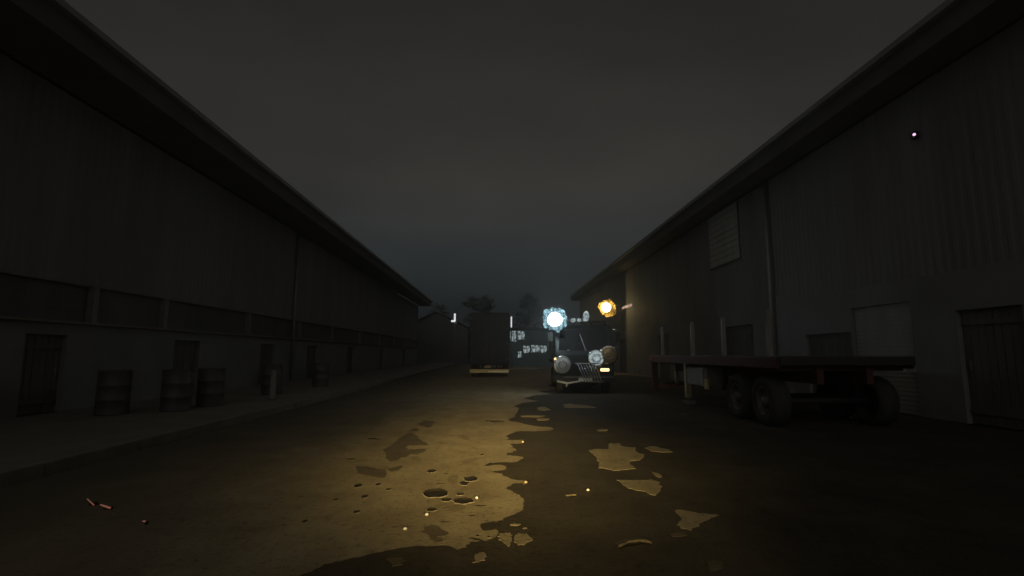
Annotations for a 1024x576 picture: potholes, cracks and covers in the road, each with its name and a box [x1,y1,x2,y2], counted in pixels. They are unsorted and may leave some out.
pothole [422,489,449,498]
